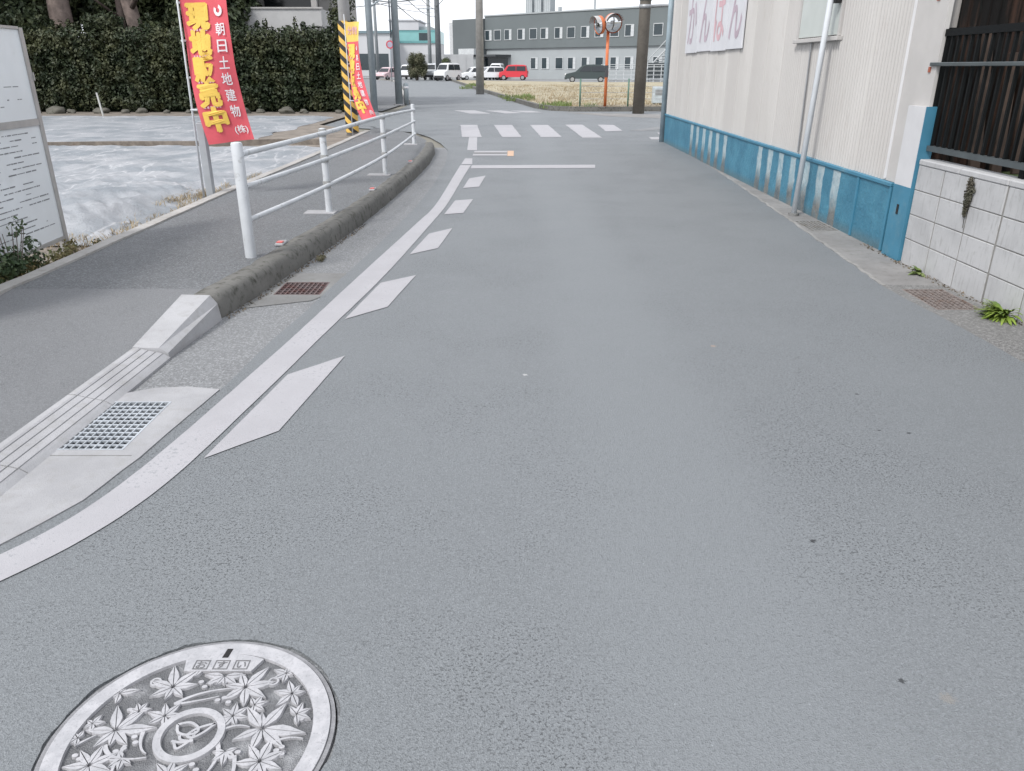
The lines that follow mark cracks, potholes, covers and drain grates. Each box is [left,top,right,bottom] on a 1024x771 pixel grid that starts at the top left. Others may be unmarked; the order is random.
manhole cover [34,641,337,771]
drain grate [273,282,330,295]
drain grate [56,401,172,450]
drain grate [795,221,838,231]
drain grate [902,289,980,310]
